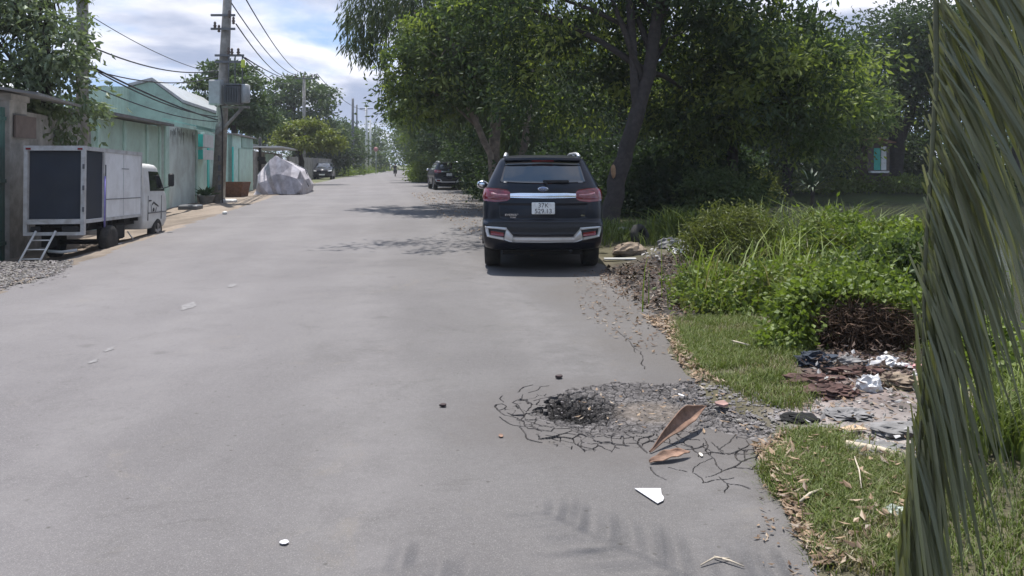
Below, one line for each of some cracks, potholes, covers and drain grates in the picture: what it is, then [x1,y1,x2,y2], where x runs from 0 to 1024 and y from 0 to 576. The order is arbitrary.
crack [495,385,759,493]
pothole [532,380,776,443]
